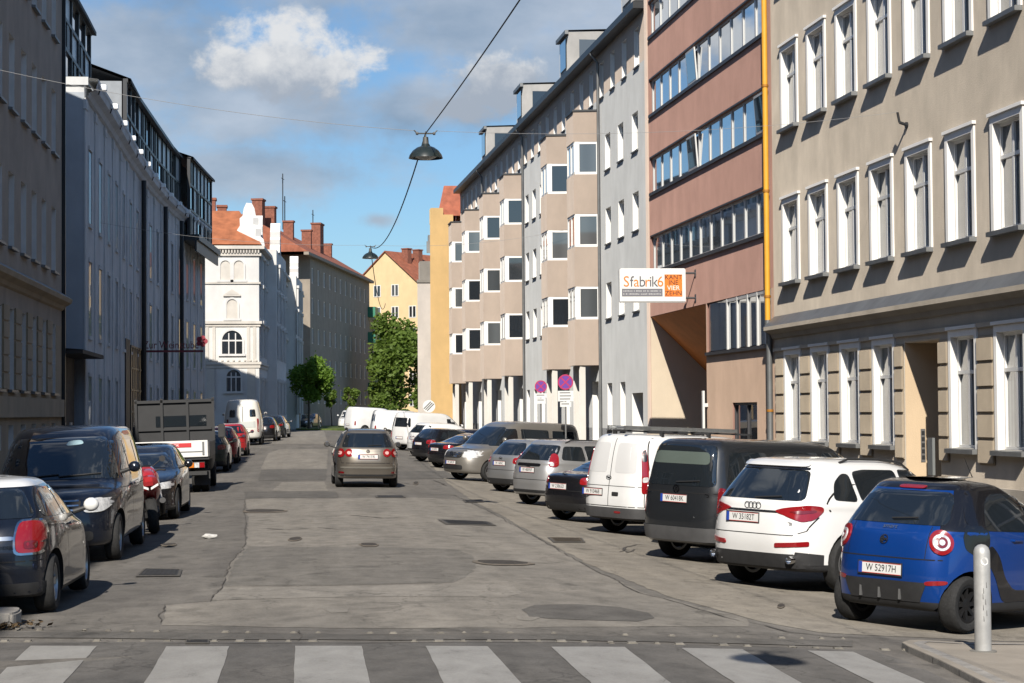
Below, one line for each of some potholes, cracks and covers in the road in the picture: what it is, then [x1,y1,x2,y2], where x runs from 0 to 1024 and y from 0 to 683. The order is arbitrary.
manhole cover [136,568,182,576]
crack [158,501,409,623]
